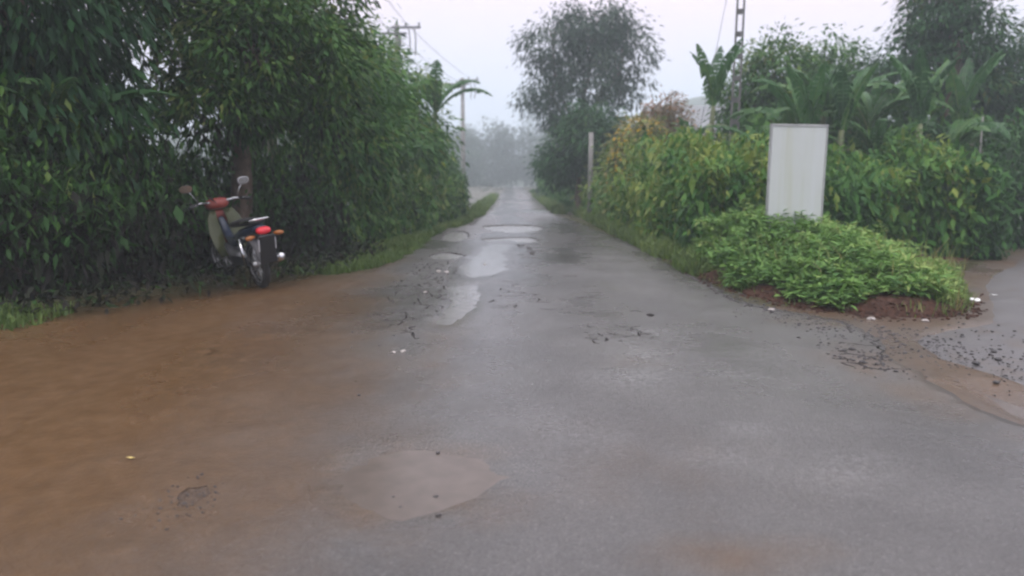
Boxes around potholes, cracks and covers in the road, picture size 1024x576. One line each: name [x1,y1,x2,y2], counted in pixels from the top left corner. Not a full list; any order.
crack [373,261,458,339]
pothole [441,231,469,242]
crack [583,310,660,344]
pothole [482,225,544,233]
pothole [177,485,210,507]
